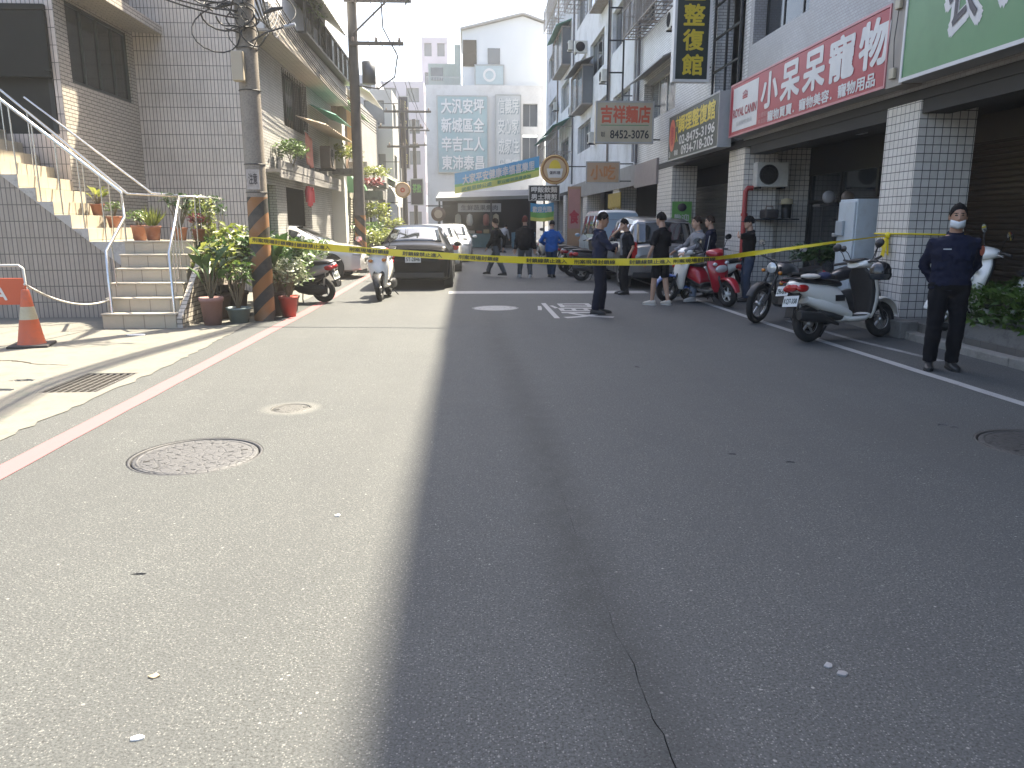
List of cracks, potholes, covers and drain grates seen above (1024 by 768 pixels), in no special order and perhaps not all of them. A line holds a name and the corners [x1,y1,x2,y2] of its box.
manhole cover [126,438,263,476]
crack [556,478,676,768]
drain grate [40,373,137,393]
manhole cover [973,429,1024,457]
manhole cover [271,404,311,413]
